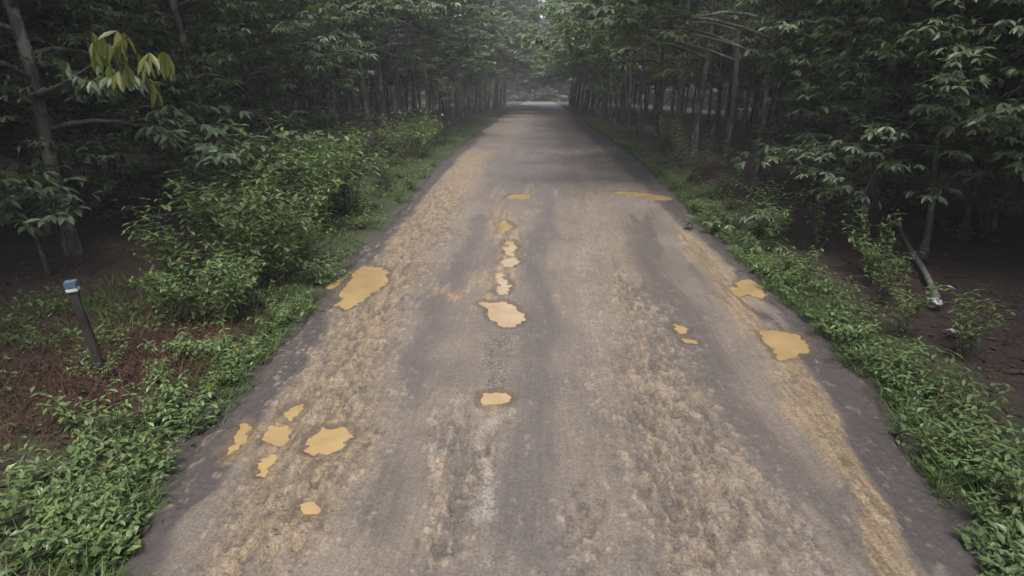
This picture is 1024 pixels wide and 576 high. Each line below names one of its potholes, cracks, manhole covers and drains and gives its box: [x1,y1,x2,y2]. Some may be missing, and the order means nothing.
pothole [219,422,254,456]
pothole [334,266,390,310]
pothole [282,403,304,421]
pothole [499,240,522,267]
pothole [254,422,295,449]
pothole [497,220,514,233]
pothole [757,329,811,361]
pothole [494,272,513,295]
pothole [299,499,321,515]
pothole [479,391,512,407]
pothole [612,191,672,201]
pothole [729,279,767,299]
